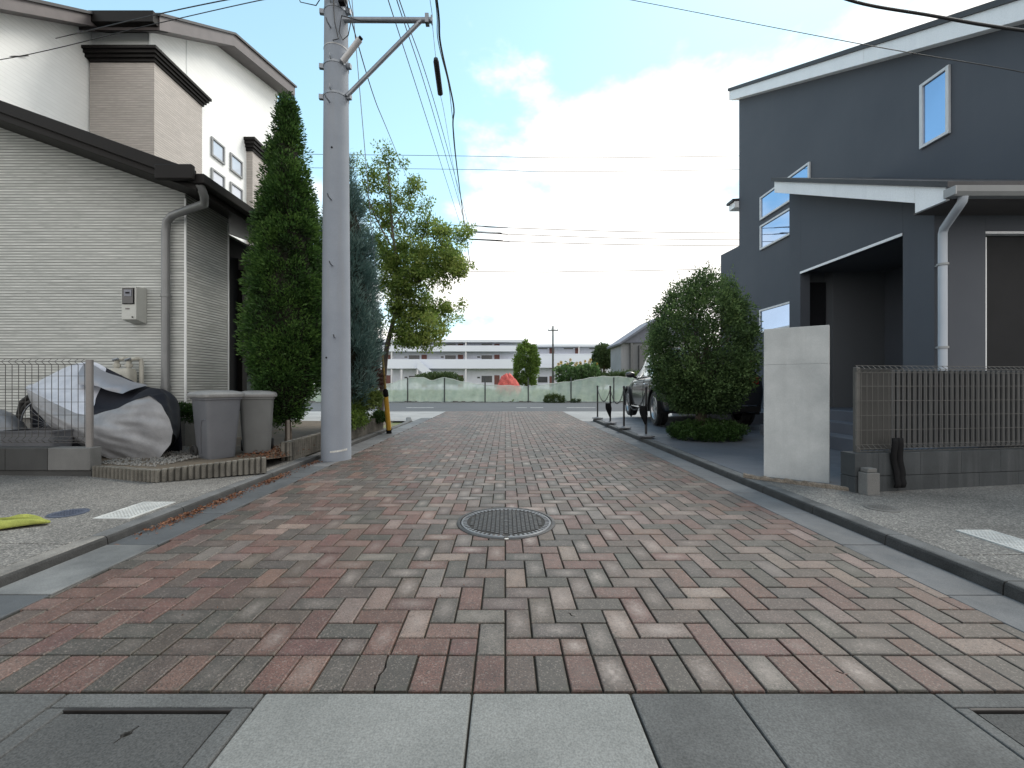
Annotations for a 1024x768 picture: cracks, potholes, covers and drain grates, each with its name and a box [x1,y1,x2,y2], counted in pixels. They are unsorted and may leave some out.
manhole cover [863,503,902,512]
manhole cover [45,508,90,518]
manhole cover [457,507,555,540]
